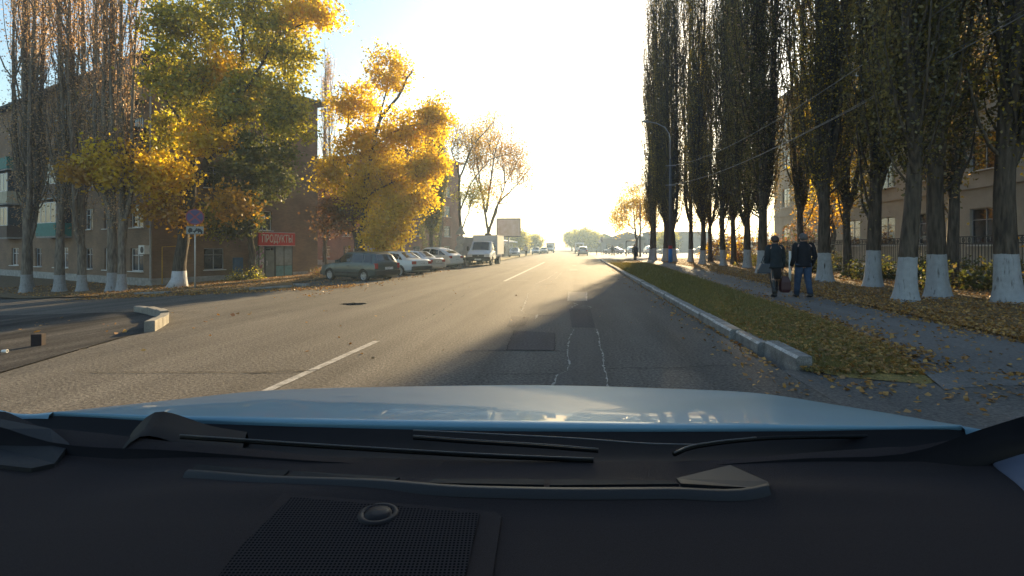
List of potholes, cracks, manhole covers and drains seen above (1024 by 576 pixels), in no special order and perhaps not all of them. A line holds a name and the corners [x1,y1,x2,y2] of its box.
crack [506,272,727,387]
